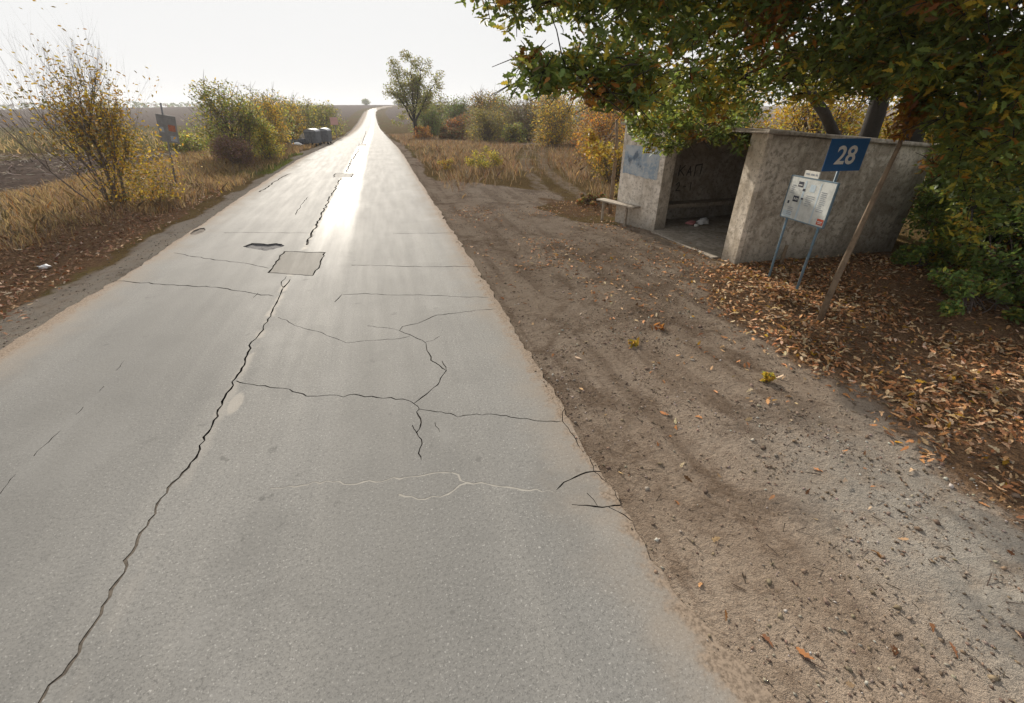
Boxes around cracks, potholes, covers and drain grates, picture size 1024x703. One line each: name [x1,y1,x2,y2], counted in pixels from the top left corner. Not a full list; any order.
crack [34,253,632,703]
pothole [243,243,285,251]
